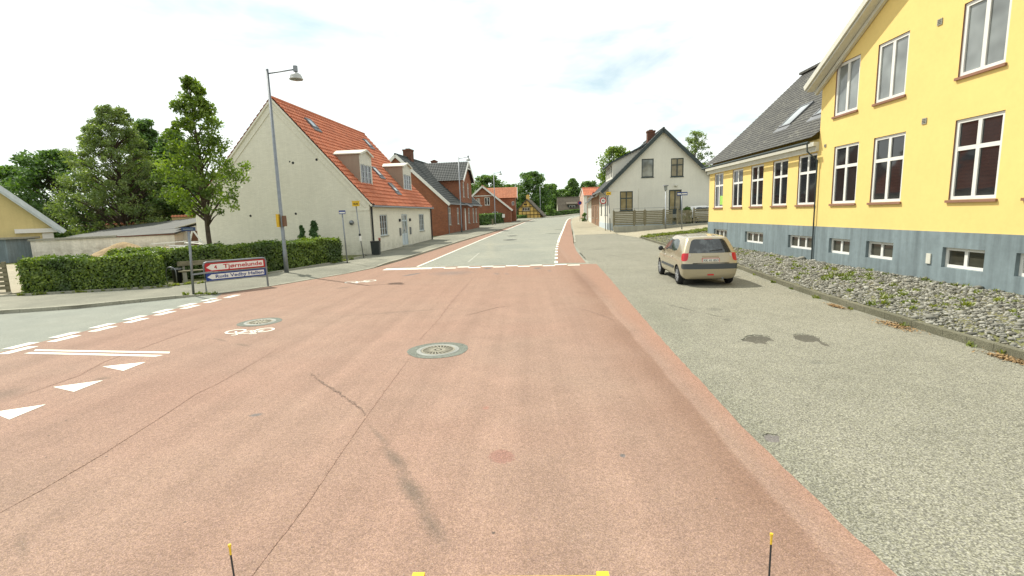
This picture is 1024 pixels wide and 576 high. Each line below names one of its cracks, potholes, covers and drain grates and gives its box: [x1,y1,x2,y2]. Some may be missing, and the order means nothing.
crack [310,373,366,416]
manhole cover [236,318,282,326]
manhole cover [407,342,468,358]
